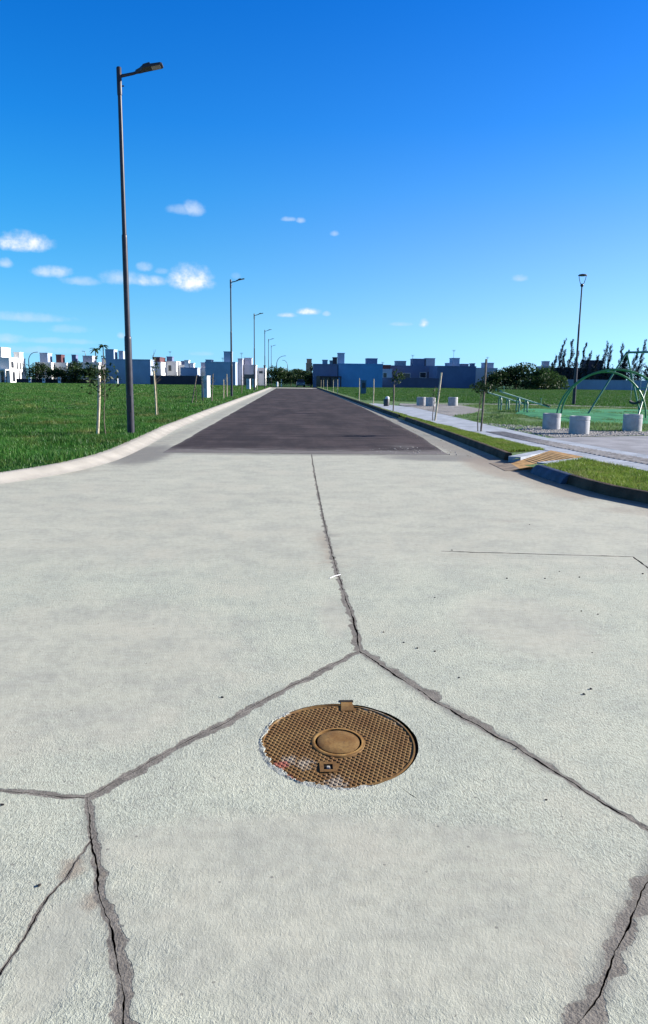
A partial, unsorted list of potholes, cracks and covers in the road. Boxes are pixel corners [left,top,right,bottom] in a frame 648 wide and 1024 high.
crack [0,454,648,1024]
manhole cover [258,700,419,790]
